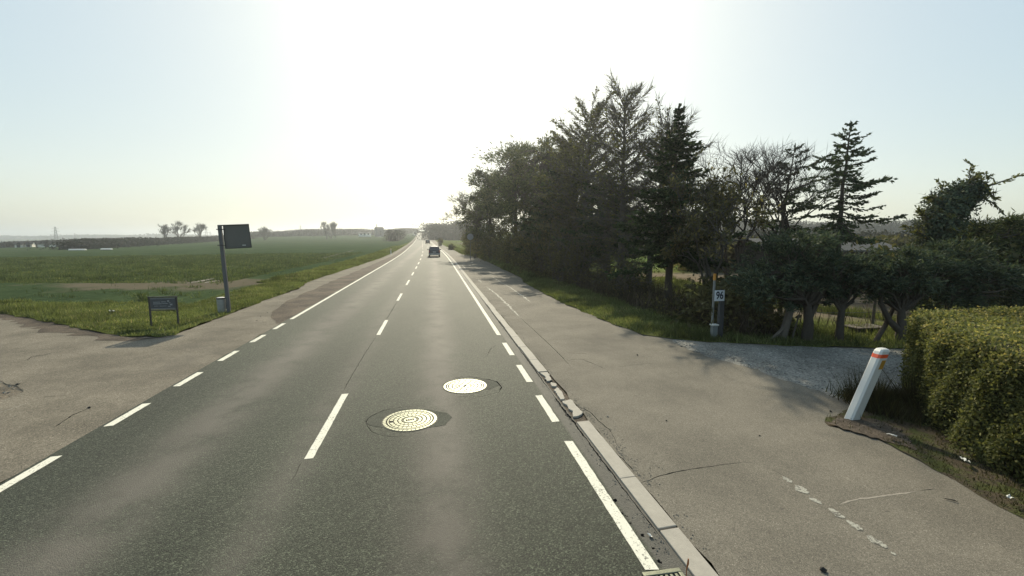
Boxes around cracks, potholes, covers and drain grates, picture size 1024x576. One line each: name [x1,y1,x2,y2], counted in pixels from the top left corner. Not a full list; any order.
manhole cover [443,379,487,394]
manhole cover [381,410,438,432]
